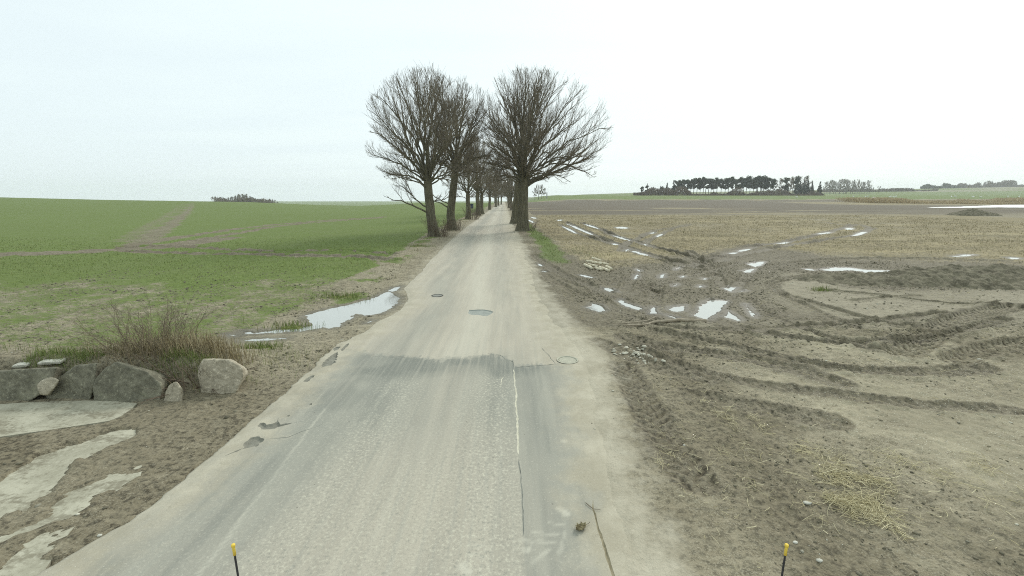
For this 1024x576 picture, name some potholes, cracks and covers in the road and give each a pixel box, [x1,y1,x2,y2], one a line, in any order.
manhole cover [557,356,578,364]
pothole [258,420,291,429]
crack [592,503,615,576]
crack [496,354,524,535]
pothole [321,352,338,367]
pothole [243,436,264,449]
